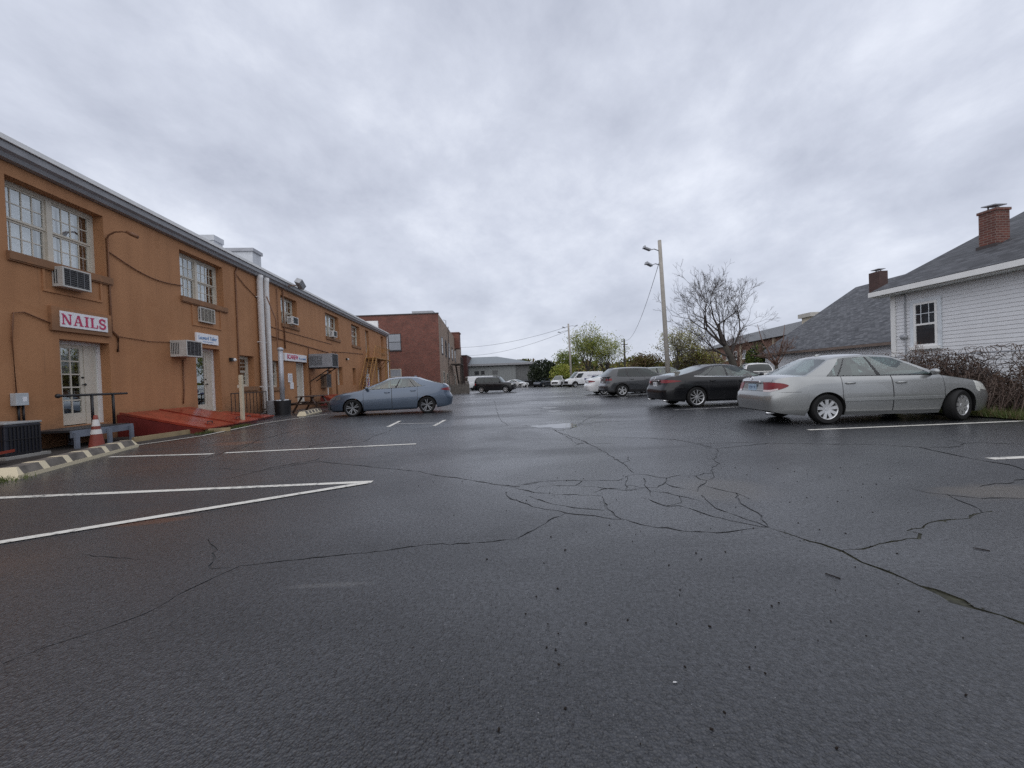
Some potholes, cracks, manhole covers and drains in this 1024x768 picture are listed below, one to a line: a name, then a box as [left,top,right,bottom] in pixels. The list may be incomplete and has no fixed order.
crack [3,426,1024,664]
